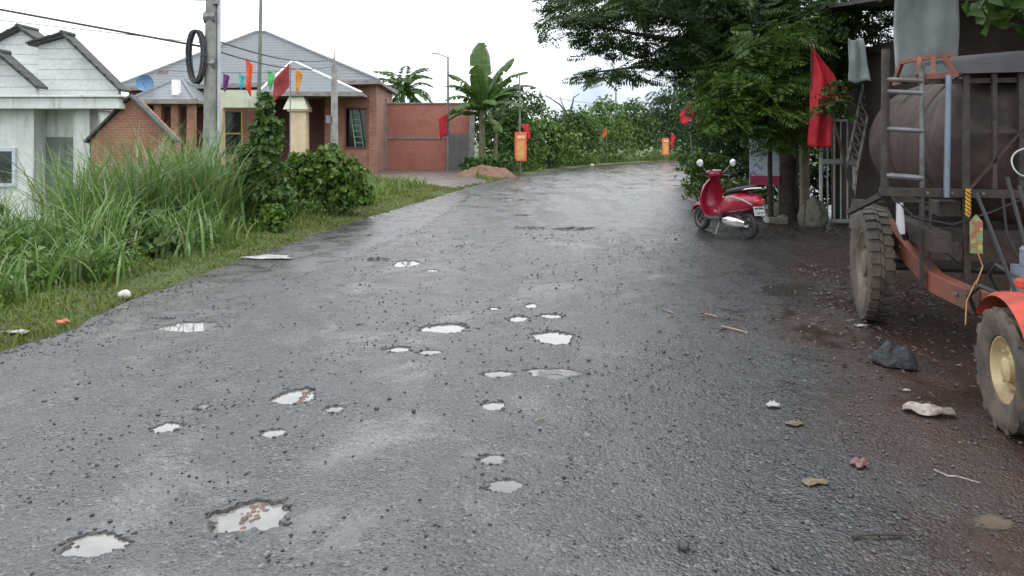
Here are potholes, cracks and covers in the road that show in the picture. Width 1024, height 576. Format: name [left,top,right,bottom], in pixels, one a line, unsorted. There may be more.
pothole [268,386,322,405]
pothole [479,477,528,493]
pothole [148,421,186,434]
pothole [258,427,288,438]
pothole [522,365,591,379]
pothole [479,369,518,378]
pothole [480,399,506,411]
pothole [321,403,347,414]
pothole [205,496,293,538]
pothole [154,320,231,333]
pothole [475,452,507,465]
pothole [504,314,531,322]
